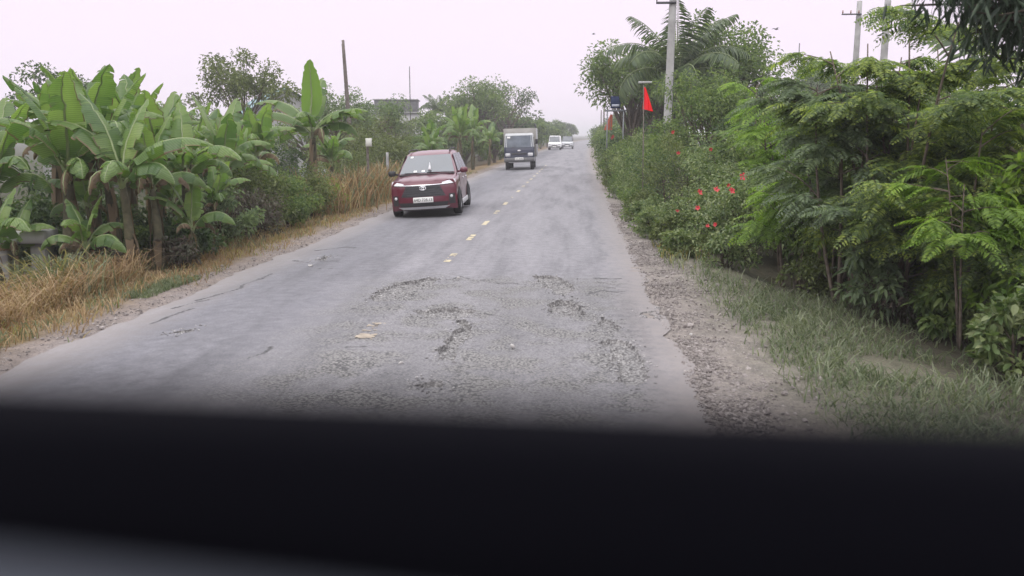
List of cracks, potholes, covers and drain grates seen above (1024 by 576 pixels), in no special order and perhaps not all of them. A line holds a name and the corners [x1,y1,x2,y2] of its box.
pothole [587,336,658,390]
crack [247,346,274,359]
pothole [589,312,629,334]
pothole [363,275,444,305]
crack [150,274,271,324]
pothole [529,273,580,297]
pothole [156,324,206,337]
pothole [425,316,481,365]
pothole [541,296,595,320]
